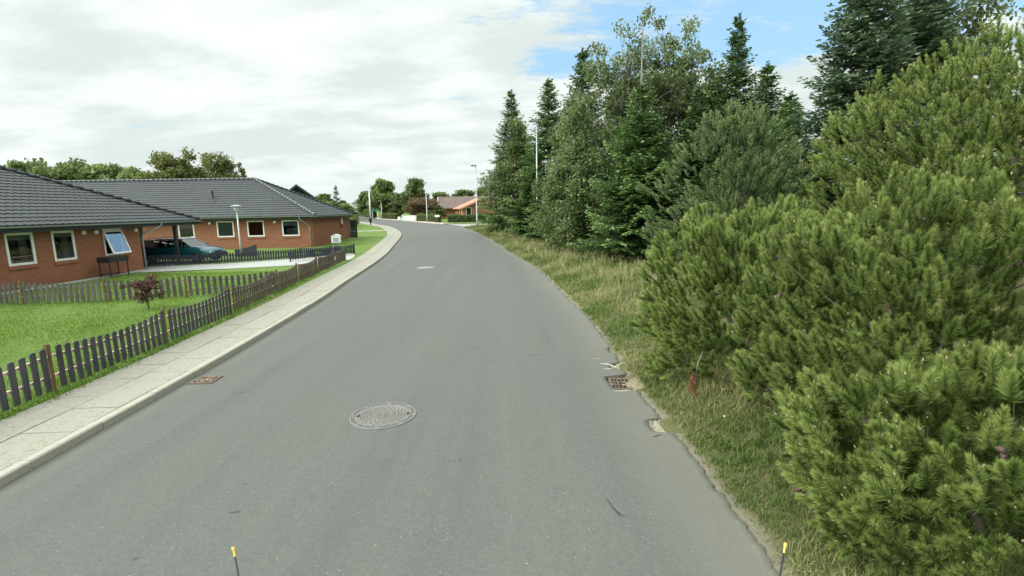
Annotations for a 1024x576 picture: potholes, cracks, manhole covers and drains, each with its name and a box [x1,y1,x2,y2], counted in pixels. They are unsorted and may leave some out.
drain grate [188,376,223,384]
pothole [647,417,665,432]
drain grate [608,378,633,390]
manhole cover [349,402,417,430]
